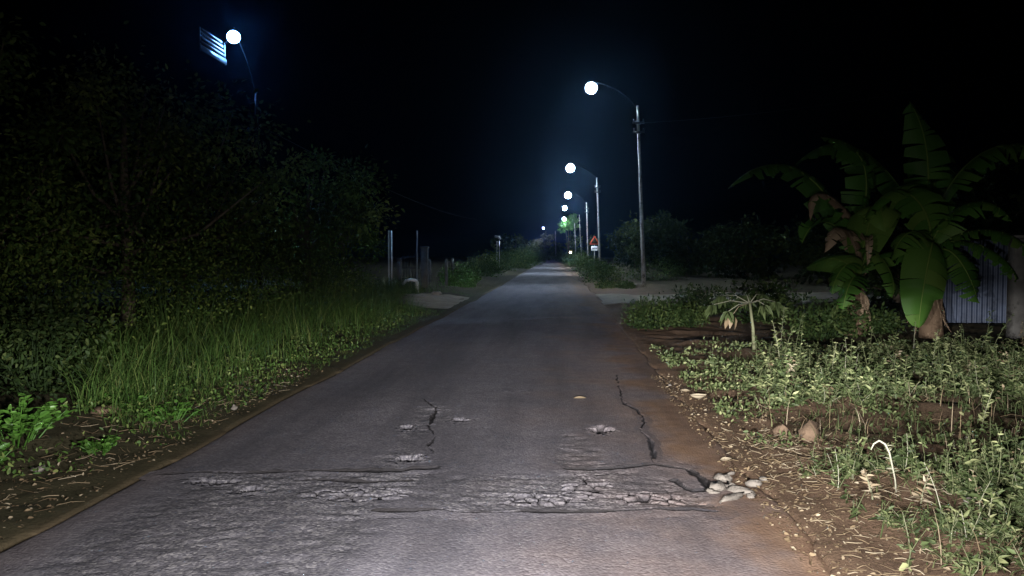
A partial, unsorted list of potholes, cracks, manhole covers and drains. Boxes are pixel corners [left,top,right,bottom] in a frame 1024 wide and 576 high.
pothole [393,423,418,432]
crack [138,374,741,521]
pothole [583,423,624,437]
pothole [444,416,482,424]
pothole [384,453,433,464]
